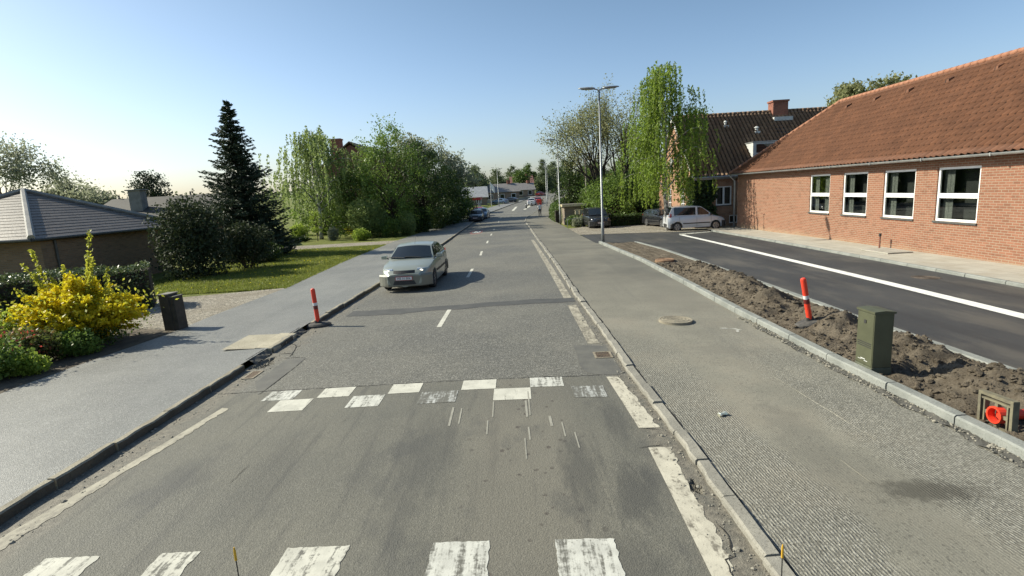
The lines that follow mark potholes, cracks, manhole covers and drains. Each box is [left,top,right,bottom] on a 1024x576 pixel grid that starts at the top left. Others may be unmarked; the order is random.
pothole [248,357,276,370]
drain grate [593,351,614,359]
manhole cover [659,316,693,326]
drain grate [241,370,264,380]
